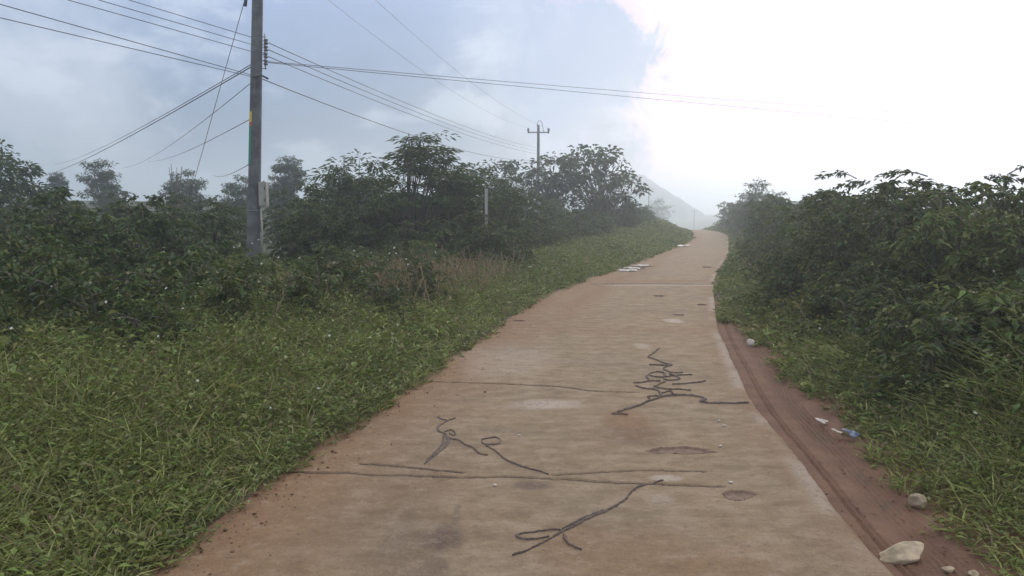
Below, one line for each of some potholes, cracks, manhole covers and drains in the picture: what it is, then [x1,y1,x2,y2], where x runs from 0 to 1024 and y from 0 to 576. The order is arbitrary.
crack [416,347,749,415]
pothole [721,490,757,501]
pothole [646,446,717,454]
crack [282,415,723,556]
